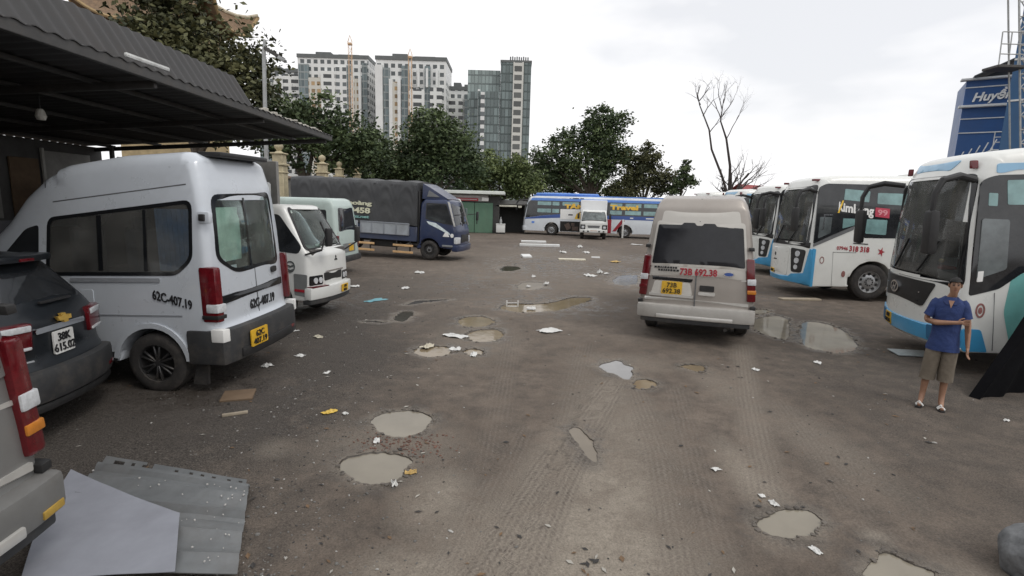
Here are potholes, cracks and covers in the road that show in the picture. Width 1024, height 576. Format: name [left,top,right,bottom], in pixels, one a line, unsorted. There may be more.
pothole [370,408,436,440]
pothole [677,363,708,373]
pothole [457,315,497,328]
pothole [796,321,861,354]
pothole [751,505,828,541]
pothole [335,450,419,487]
pothole [495,296,592,313]
pothole [569,427,598,462]
pothole [862,547,942,576]
pothole [599,360,634,380]
pothole [461,347,486,355]
pothole [632,379,660,390]
